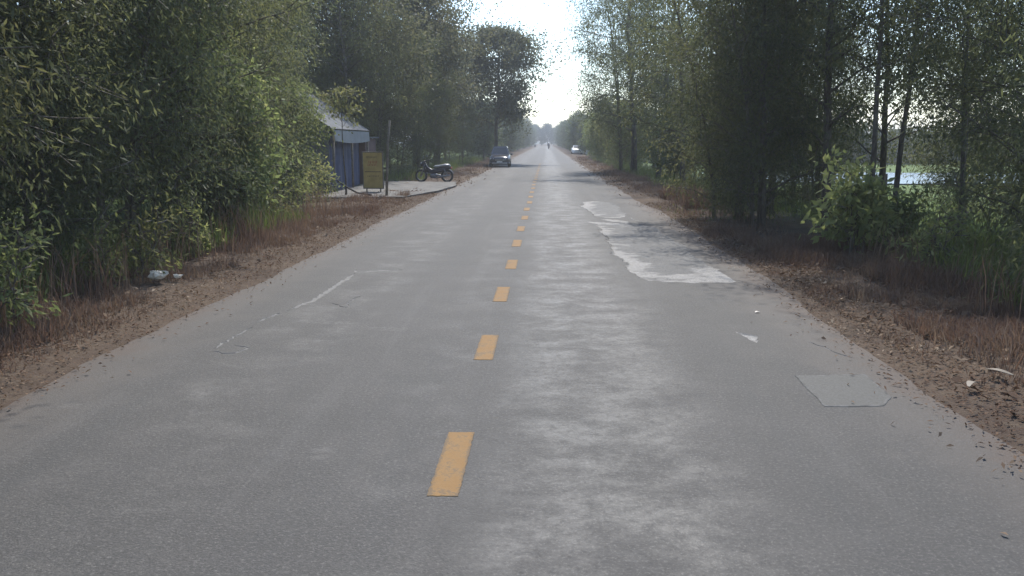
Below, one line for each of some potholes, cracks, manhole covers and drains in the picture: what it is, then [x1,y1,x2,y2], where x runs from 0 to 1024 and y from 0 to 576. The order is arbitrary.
crack [214,270,391,354]
